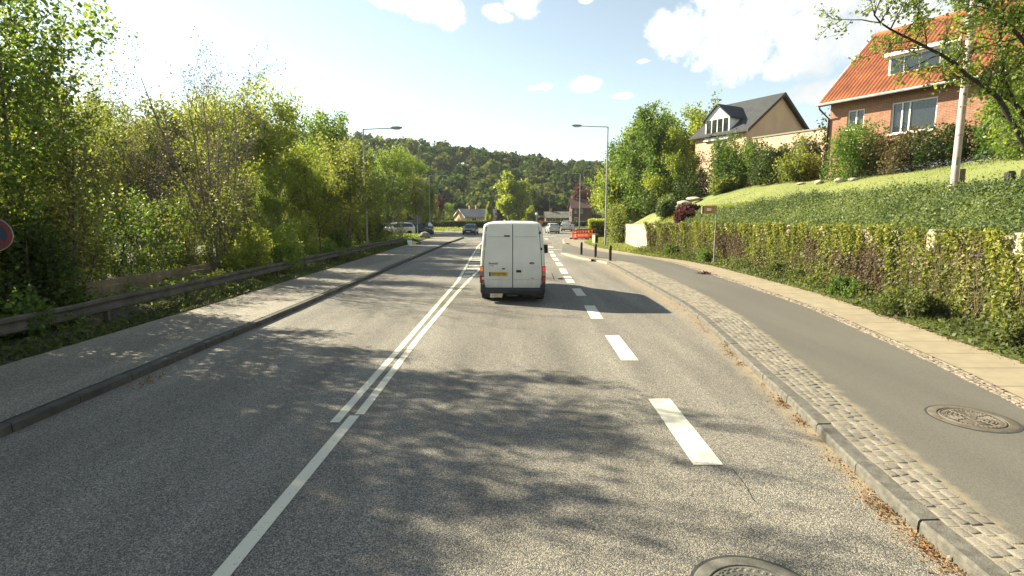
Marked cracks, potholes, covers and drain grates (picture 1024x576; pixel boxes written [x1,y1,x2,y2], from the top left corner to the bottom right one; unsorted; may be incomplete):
manhole cover [690,555,801,576]
manhole cover [924,405,1024,433]
